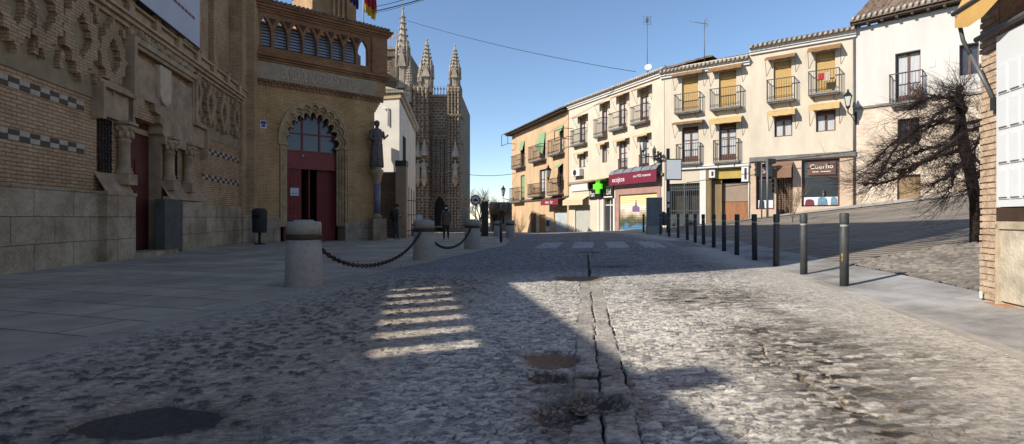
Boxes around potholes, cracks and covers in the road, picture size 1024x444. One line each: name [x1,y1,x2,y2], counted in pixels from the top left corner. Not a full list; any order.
pothole [532,406,589,433]
pothole [567,397,627,416]
